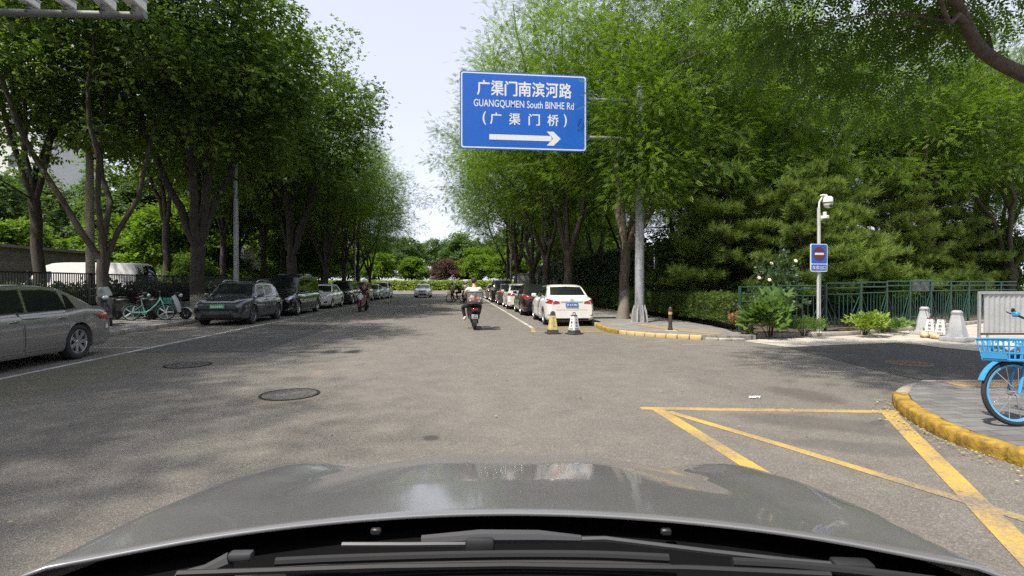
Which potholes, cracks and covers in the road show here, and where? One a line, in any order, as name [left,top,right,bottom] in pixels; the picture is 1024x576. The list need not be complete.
manhole cover [258,388,320,401]
